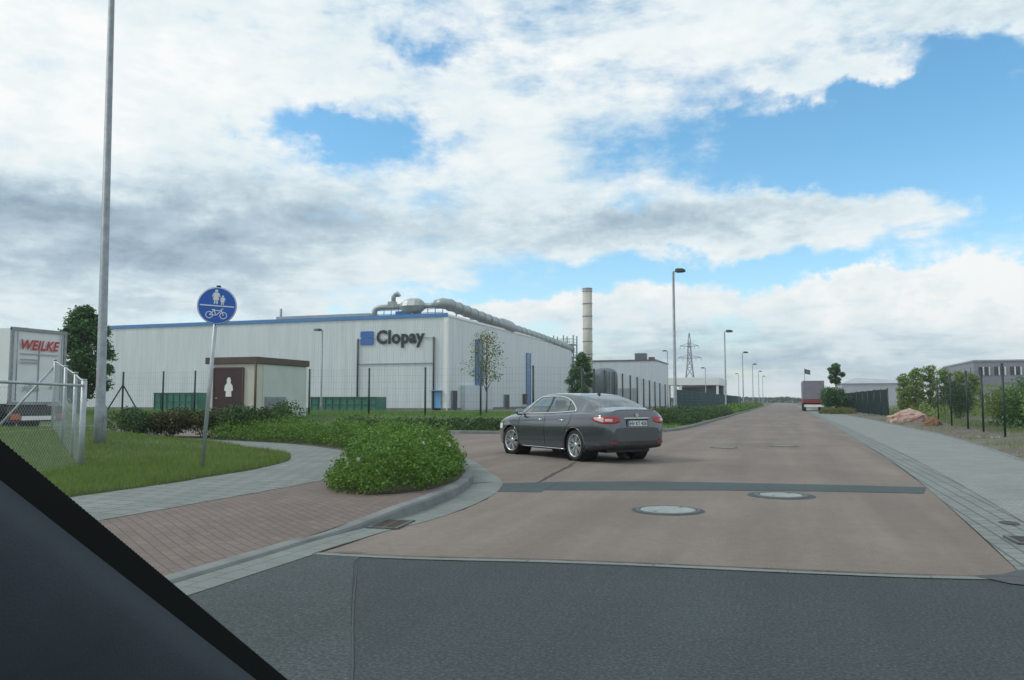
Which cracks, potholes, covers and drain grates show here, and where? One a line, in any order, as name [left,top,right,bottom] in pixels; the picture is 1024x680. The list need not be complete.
manhole cover [632,505,705,515]
drain grate [1003,535,1024,544]
drain grate [366,519,415,529]
